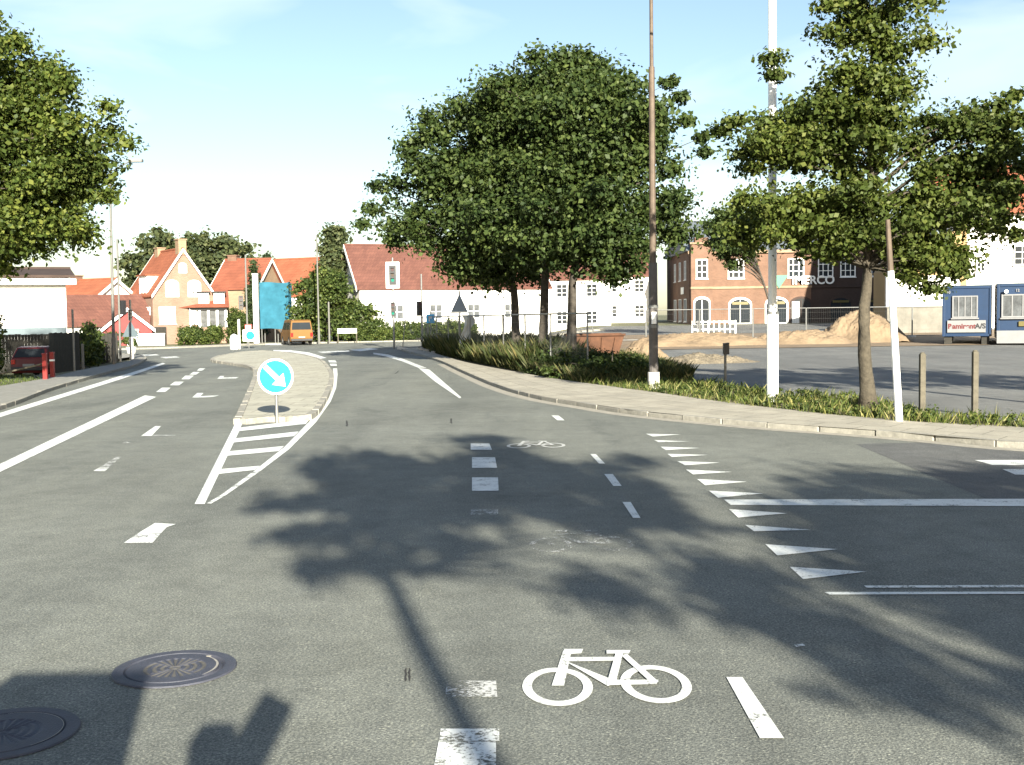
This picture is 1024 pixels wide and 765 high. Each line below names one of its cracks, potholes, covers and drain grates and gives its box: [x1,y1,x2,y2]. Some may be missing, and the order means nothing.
manhole cover [0,707,81,760]
manhole cover [111,650,237,689]
